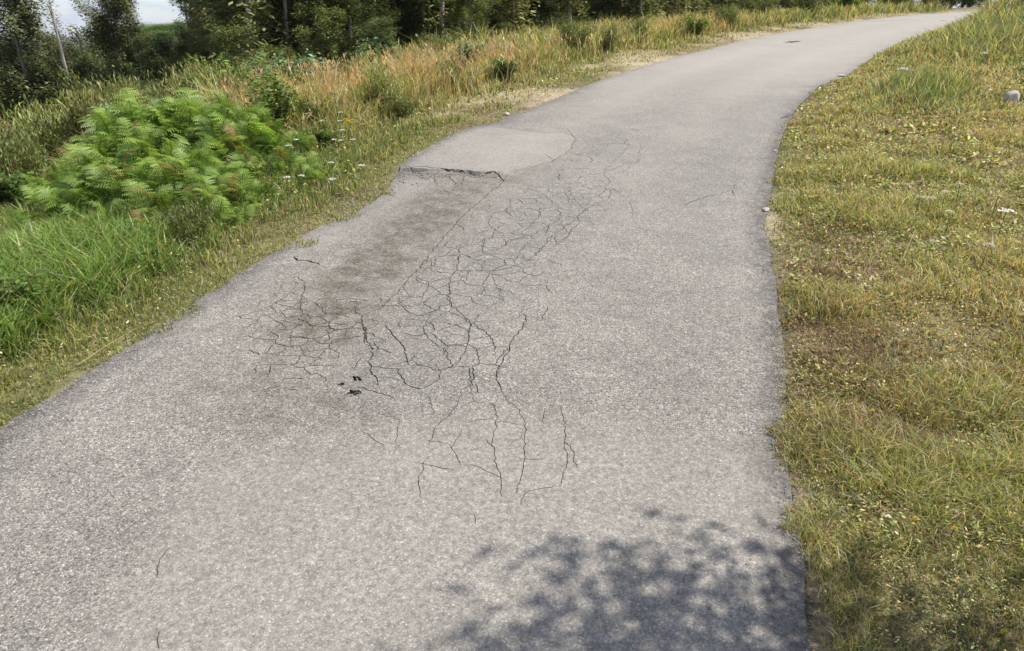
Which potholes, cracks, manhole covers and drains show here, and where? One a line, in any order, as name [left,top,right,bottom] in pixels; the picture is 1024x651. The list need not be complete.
crack [235,130,642,524]
